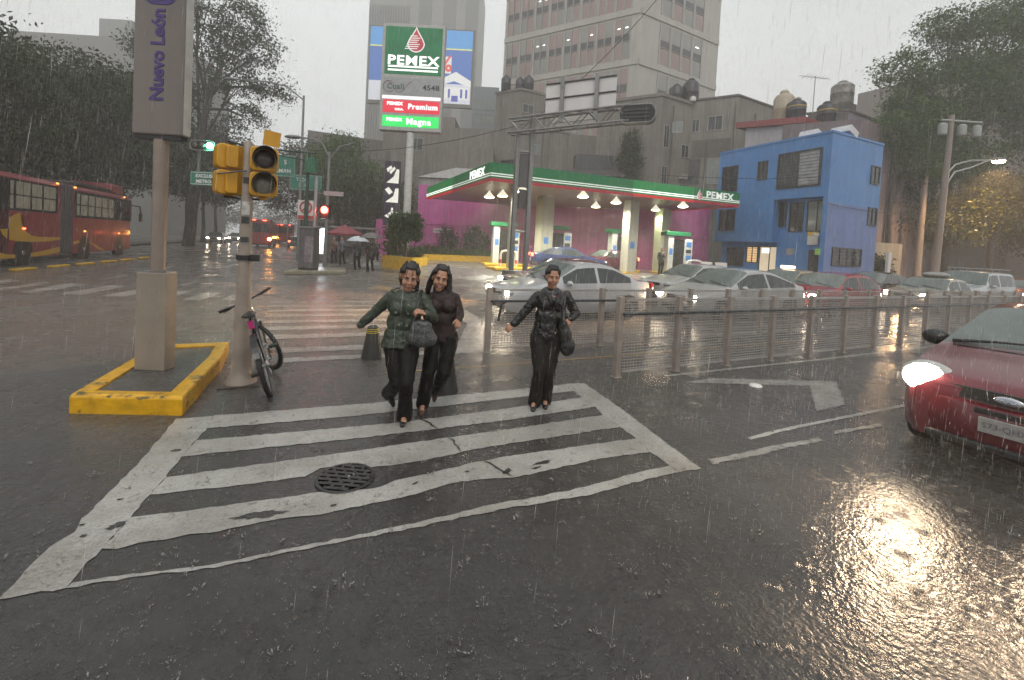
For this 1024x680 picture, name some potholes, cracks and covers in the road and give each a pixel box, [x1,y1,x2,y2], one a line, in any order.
manhole cover [314,463,375,493]
